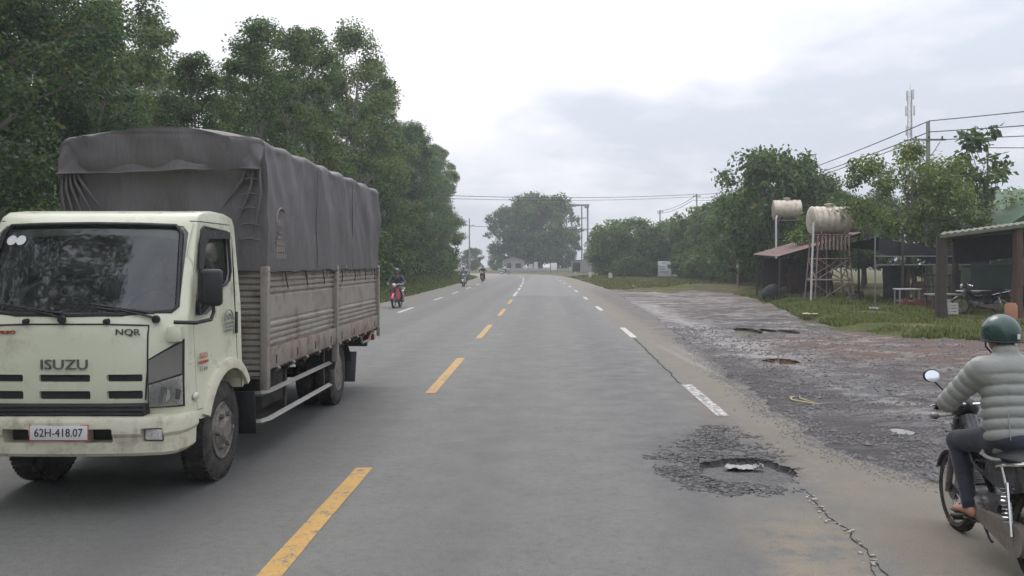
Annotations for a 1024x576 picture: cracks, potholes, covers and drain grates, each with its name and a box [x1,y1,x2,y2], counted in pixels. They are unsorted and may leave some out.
crack [634,338,681,384]
pothole [698,458,798,485]
crack [640,425,888,576]
